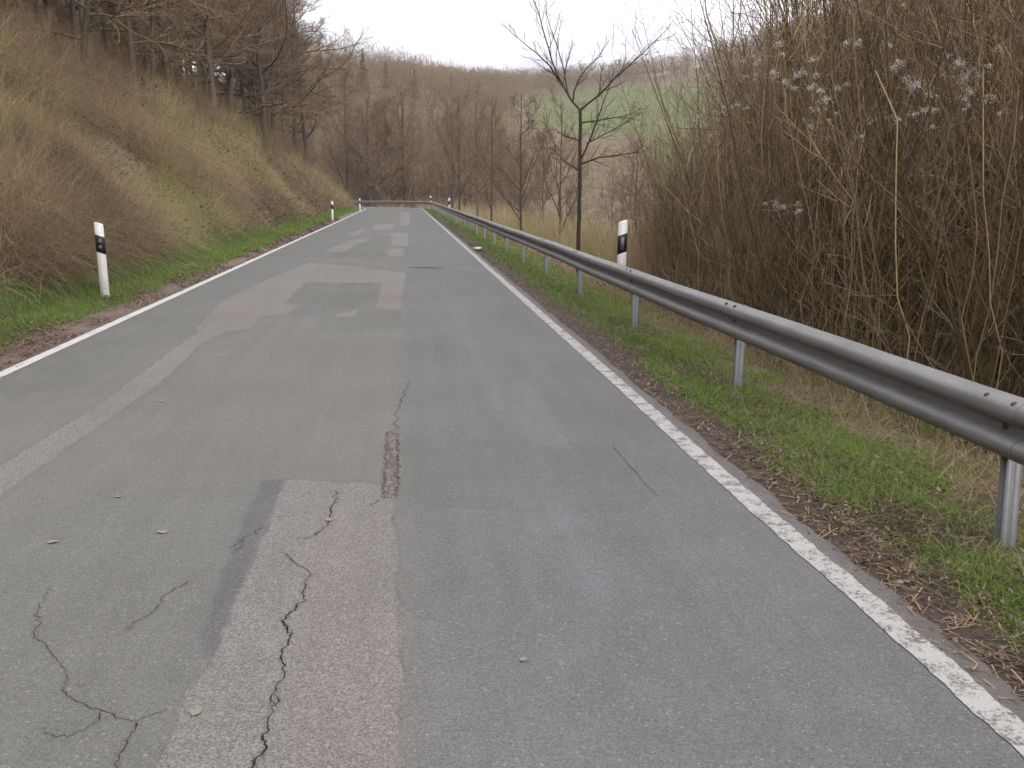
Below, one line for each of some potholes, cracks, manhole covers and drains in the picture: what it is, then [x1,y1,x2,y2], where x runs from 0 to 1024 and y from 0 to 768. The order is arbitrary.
crack [251,492,338,768]
crack [33,588,165,768]
pothole [380,431,402,499]
